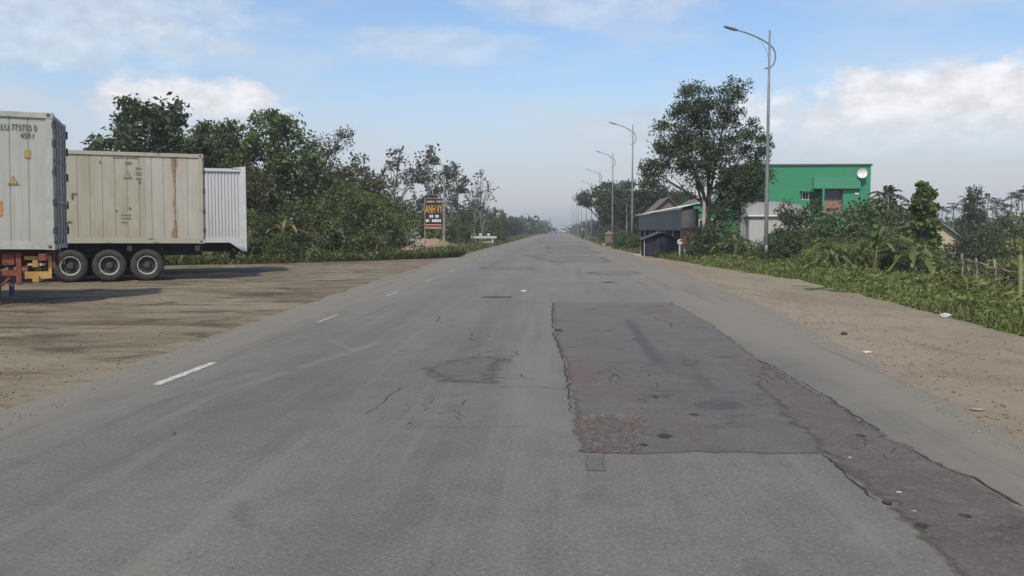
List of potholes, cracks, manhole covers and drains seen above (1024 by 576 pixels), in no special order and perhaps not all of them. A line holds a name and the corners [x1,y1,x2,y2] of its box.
crack [366,374,567,428]
